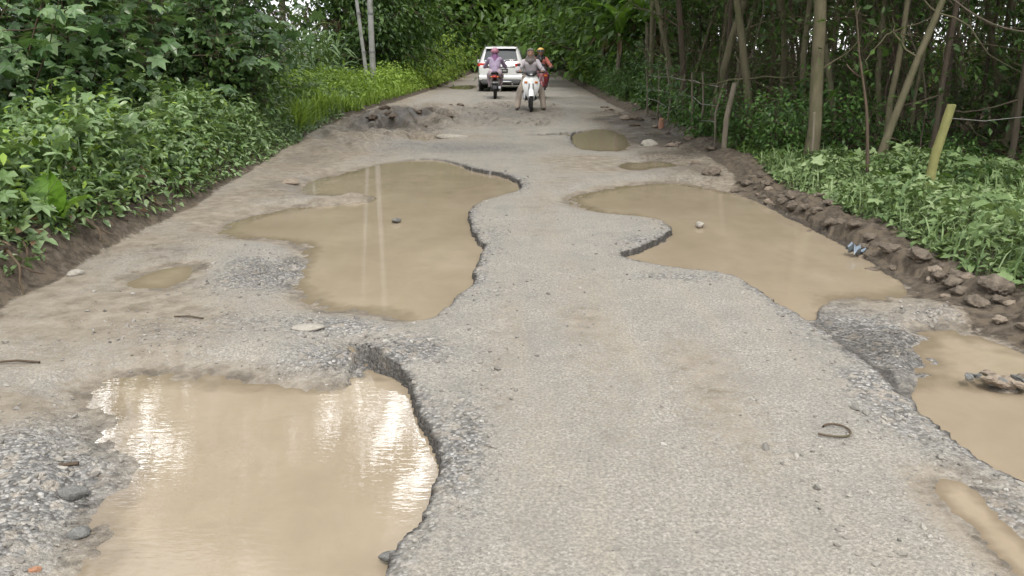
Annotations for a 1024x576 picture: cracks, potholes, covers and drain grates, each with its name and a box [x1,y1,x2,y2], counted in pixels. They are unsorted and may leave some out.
pothole [215,159,522,321]
pothole [562,129,635,152]
pothole [909,315,1024,482]
pothole [125,265,200,290]
pothole [619,161,677,170]
pothole [931,479,1024,576]
pothole [70,343,442,576]
pothole [567,183,909,321]
